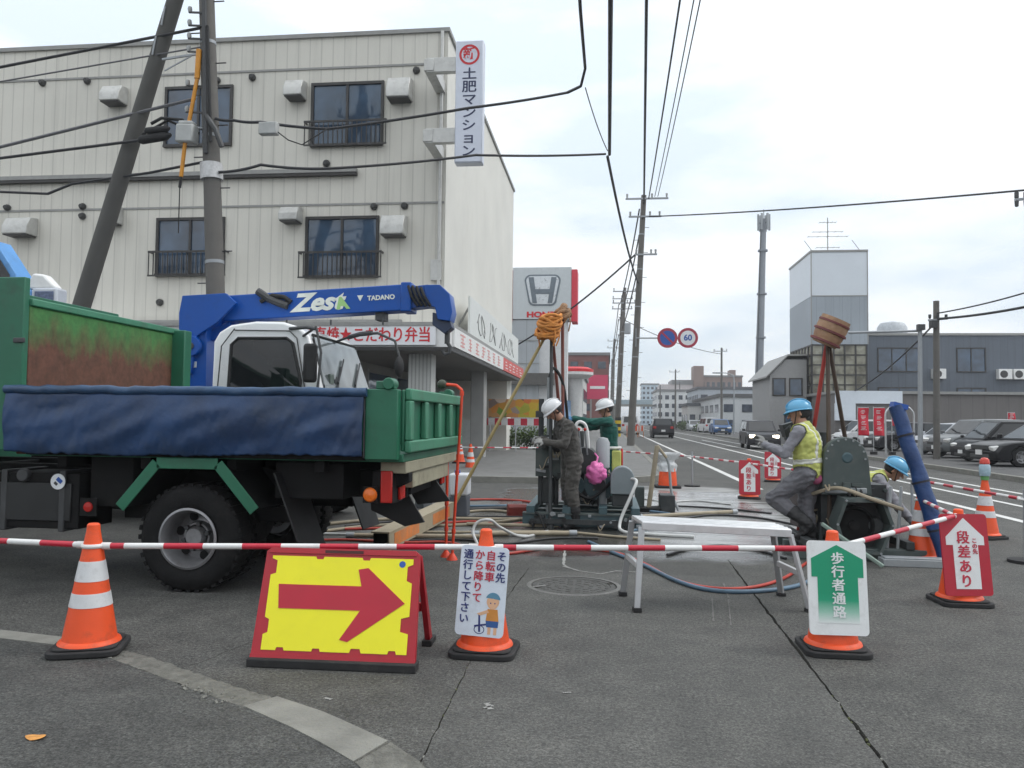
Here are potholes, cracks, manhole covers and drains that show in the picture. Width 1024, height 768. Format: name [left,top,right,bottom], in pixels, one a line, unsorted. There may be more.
manhole cover [527,576,621,596]
